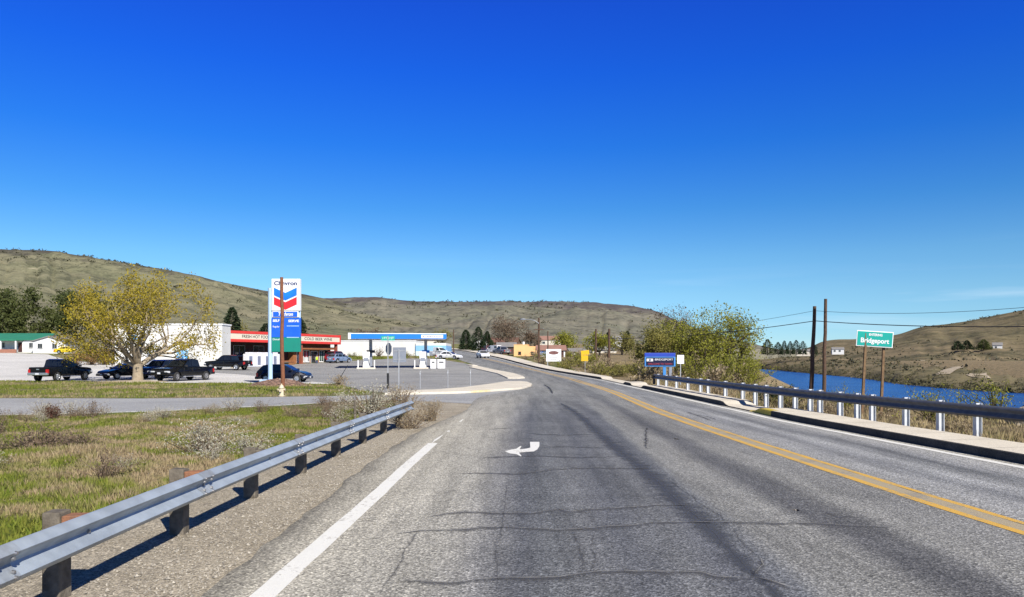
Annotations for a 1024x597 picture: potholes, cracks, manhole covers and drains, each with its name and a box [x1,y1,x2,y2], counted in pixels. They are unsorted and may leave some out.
crack [406,482,867,584]
